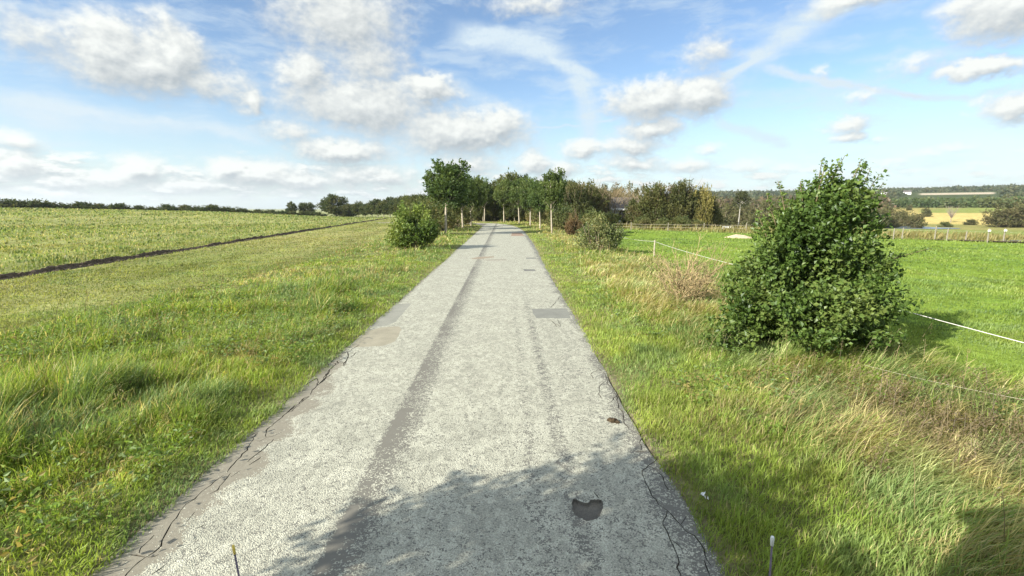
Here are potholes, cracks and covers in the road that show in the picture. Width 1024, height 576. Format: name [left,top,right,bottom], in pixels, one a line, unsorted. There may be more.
crack [125,346,357,576]
pothole [572,499,603,521]
crack [591,367,711,576]
